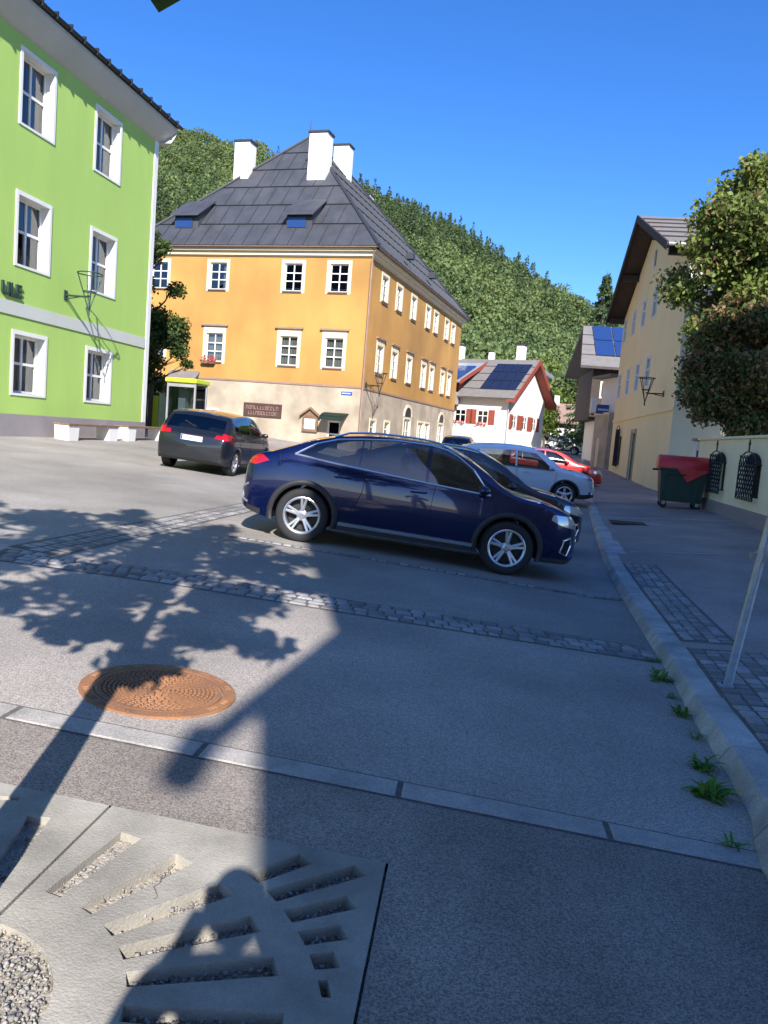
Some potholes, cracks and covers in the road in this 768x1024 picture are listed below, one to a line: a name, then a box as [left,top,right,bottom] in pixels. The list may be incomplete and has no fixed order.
manhole cover [78,664,236,720]
